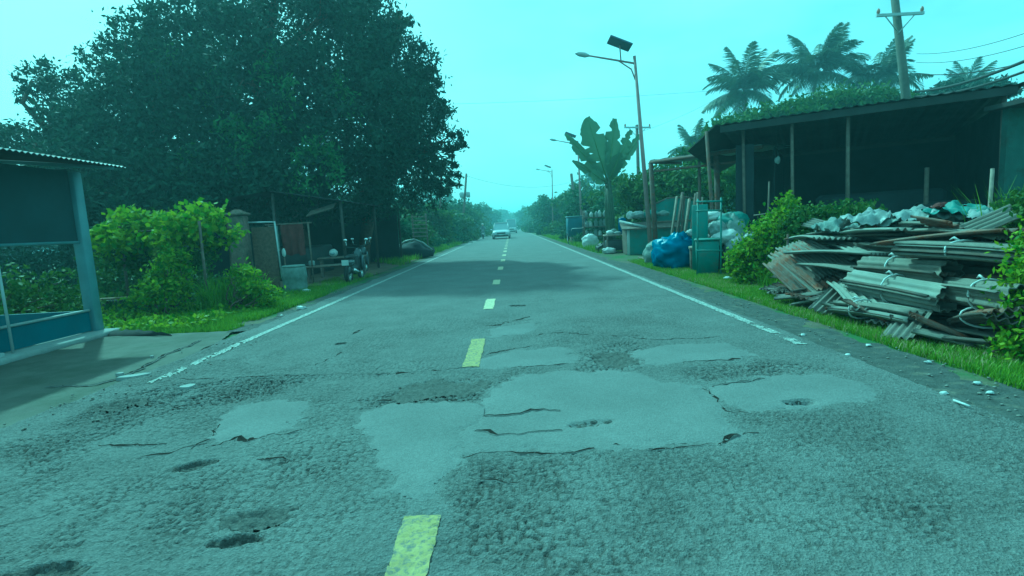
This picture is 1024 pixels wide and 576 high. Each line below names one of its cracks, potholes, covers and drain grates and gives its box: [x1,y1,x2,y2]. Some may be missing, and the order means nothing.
pothole [206,533,265,549]
pothole [569,420,613,428]
crack [688,358,771,415]
pothole [375,378,491,404]
crack [98,417,309,462]
crack [44,340,464,409]
crack [356,399,759,459]
pothole [171,459,220,473]
pothole [0,560,93,576]
